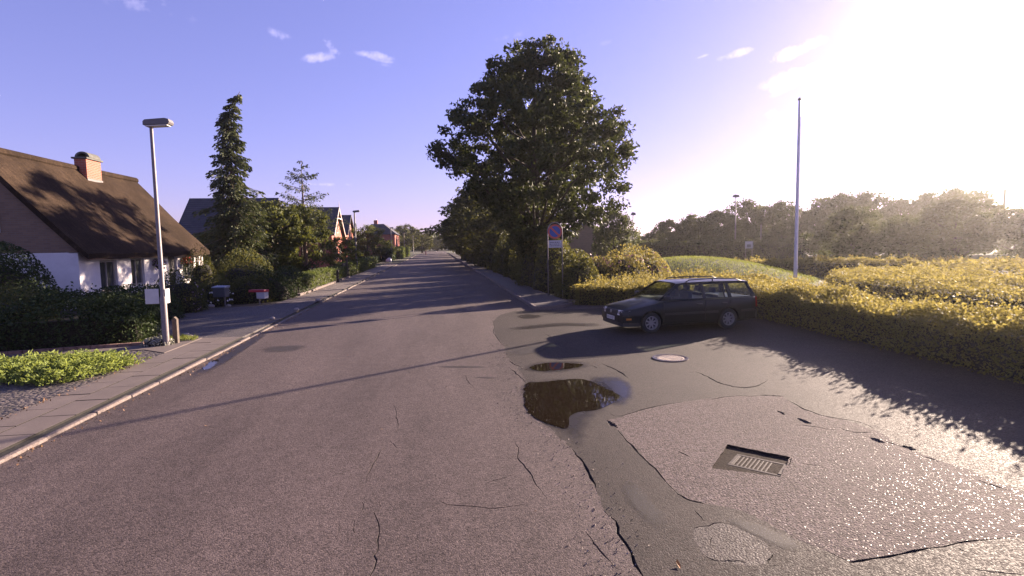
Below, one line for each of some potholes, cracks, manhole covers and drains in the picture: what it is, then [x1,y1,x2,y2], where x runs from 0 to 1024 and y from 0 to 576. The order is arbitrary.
crack [366,404,398,480]
crack [572,449,597,491]
crack [697,372,902,447]
crack [487,443,543,493]
crack [827,536,1021,575]
drain grate [712,444,790,477]
manhole cover [652,354,689,362]
crack [353,501,380,576]
crack [586,512,643,576]
